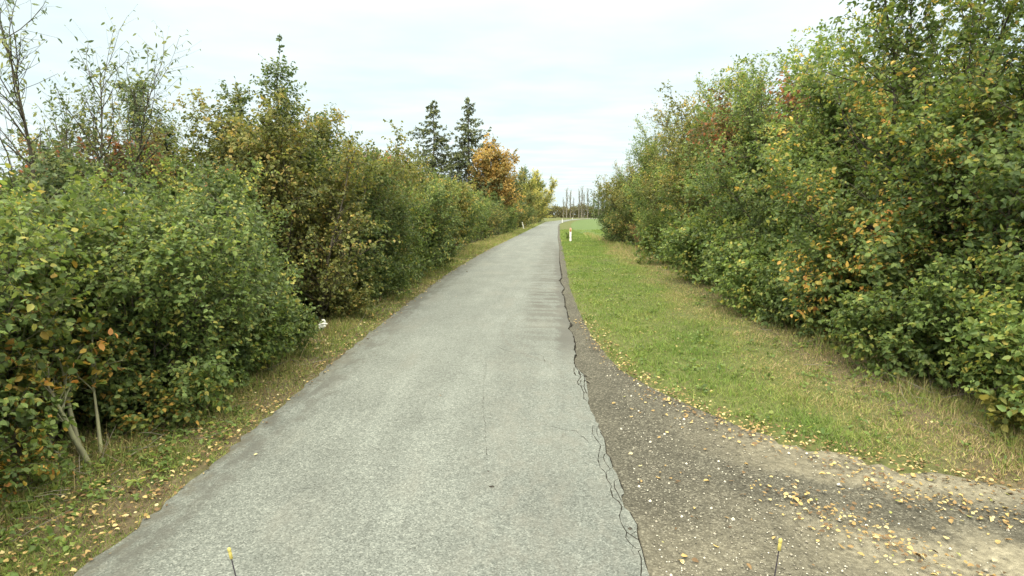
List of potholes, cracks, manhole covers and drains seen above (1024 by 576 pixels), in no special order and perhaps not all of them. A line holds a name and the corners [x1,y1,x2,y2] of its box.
crack [543,424,647,576]
crack [552,259,590,401]
